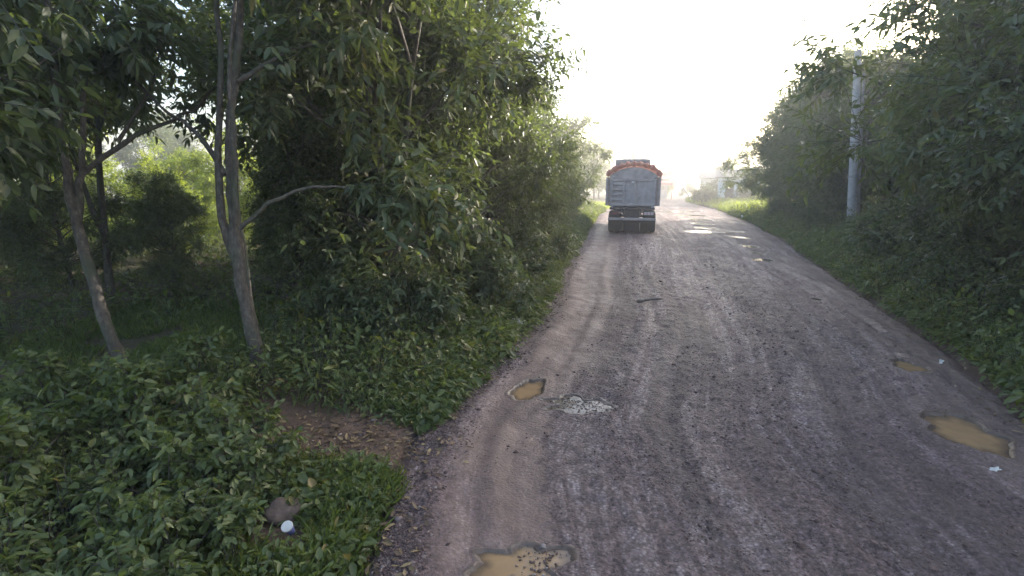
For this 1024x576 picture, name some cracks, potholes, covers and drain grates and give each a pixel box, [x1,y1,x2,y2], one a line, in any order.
pothole [459,539,583,576]
pothole [887,358,938,374]
pothole [914,410,1021,462]
pothole [537,393,621,416]
pothole [504,377,549,403]
